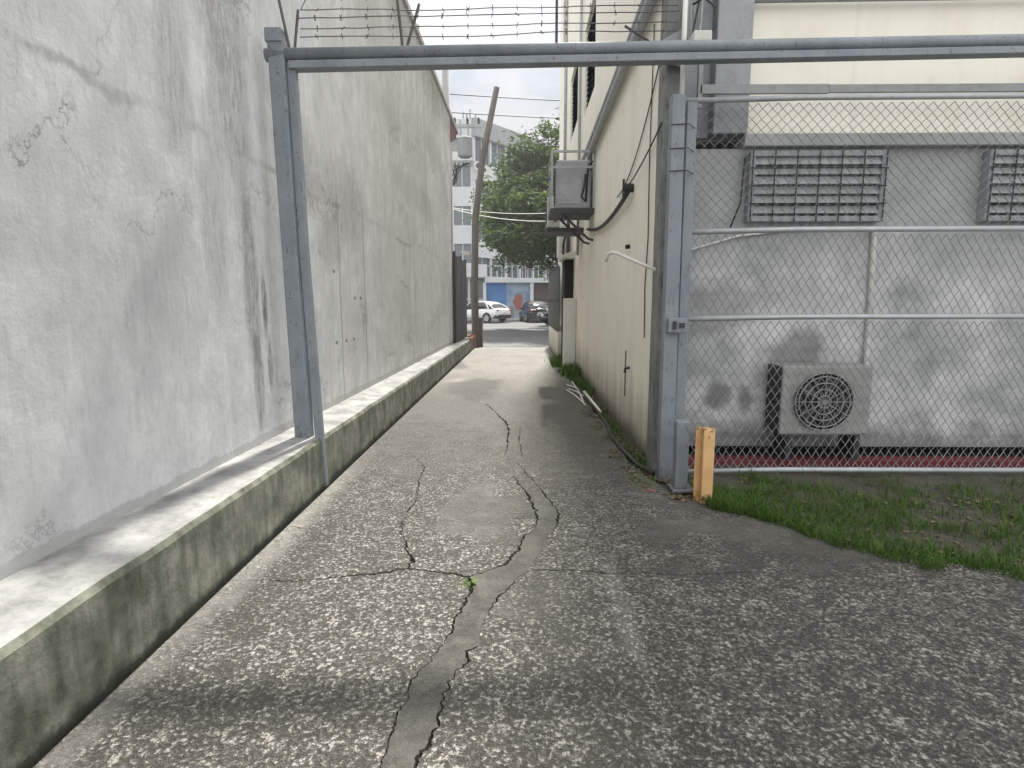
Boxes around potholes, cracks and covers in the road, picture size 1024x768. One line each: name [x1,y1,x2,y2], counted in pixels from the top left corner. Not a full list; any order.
crack [232,404,747,768]
